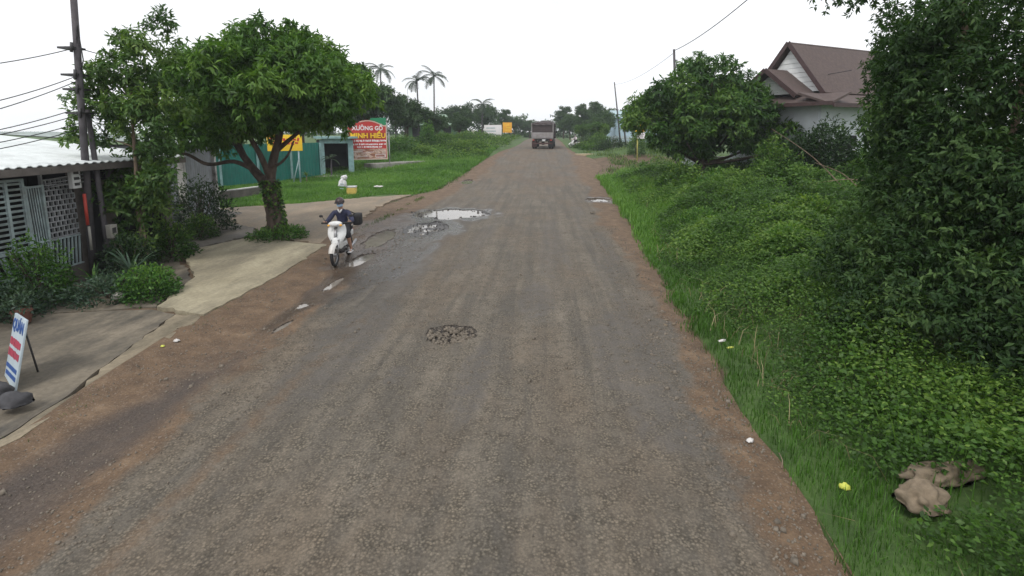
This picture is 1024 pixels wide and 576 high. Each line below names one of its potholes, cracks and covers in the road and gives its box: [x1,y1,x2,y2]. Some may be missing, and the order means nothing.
pothole [425,325,478,344]
pothole [344,253,376,267]
pothole [360,229,396,249]
pothole [411,209,491,220]
pothole [403,221,449,237]
